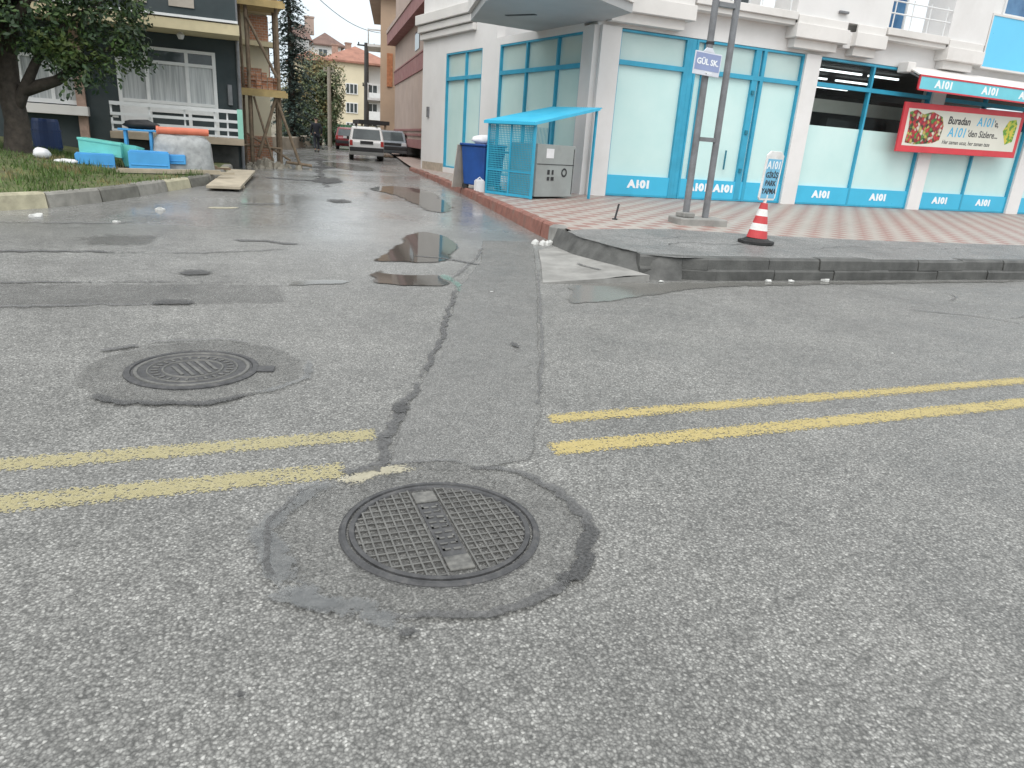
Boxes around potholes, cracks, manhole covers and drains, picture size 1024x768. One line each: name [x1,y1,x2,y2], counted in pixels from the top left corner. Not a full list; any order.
crack [342,248,483,474]
manhole cover [123,350,276,391]
manhole cover [338,482,540,590]
